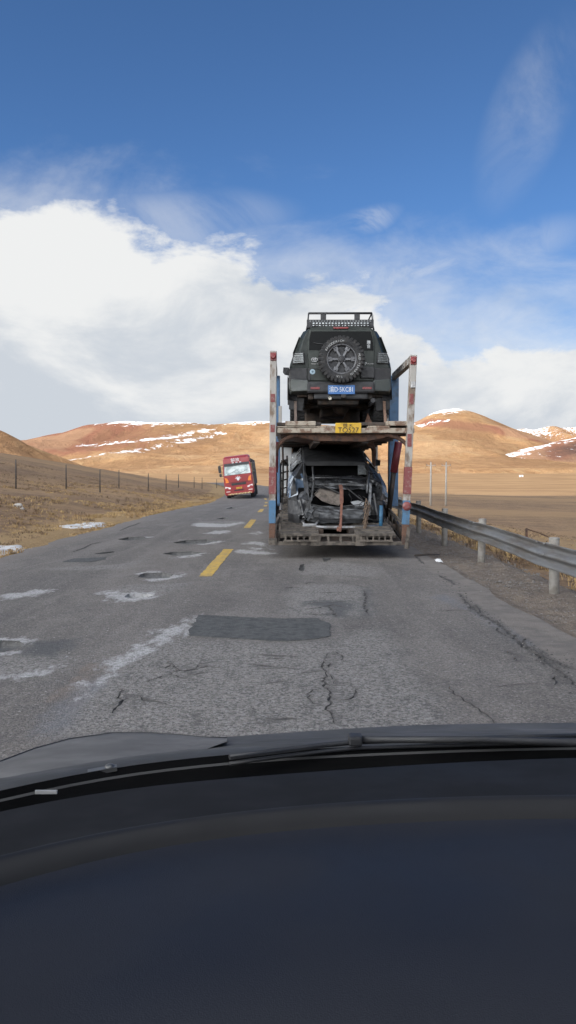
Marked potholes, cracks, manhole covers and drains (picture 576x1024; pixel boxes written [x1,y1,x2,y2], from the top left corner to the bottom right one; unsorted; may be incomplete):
crack [149,662,216,681]
crack [112,689,165,713]
crack [253,652,358,724]
crack [416,556,576,688]
crack [450,689,495,723]
